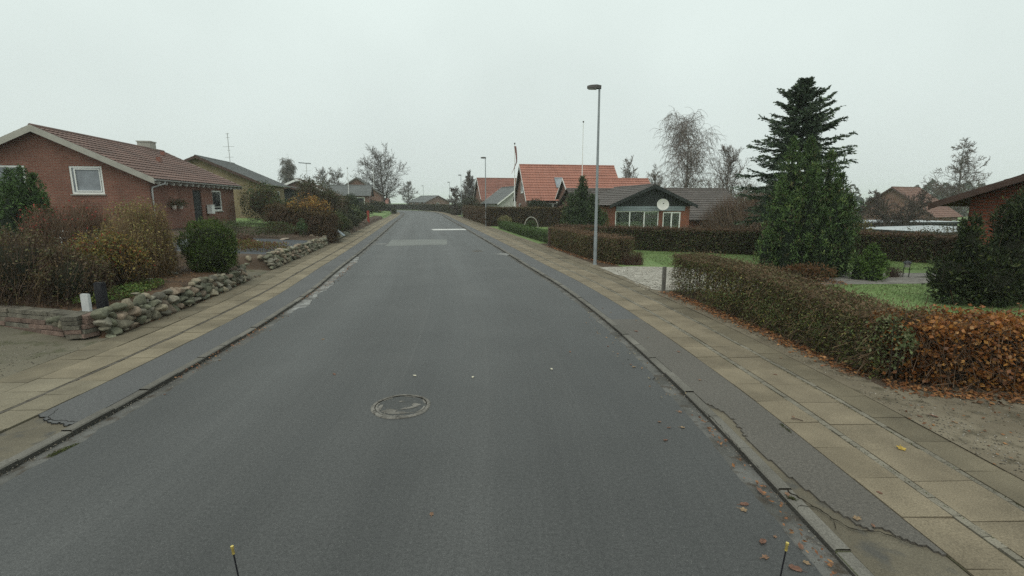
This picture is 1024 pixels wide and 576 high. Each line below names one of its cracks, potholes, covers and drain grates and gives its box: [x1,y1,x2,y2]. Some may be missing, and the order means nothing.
manhole cover [371,394,431,419]
crack [784,488,931,549]
